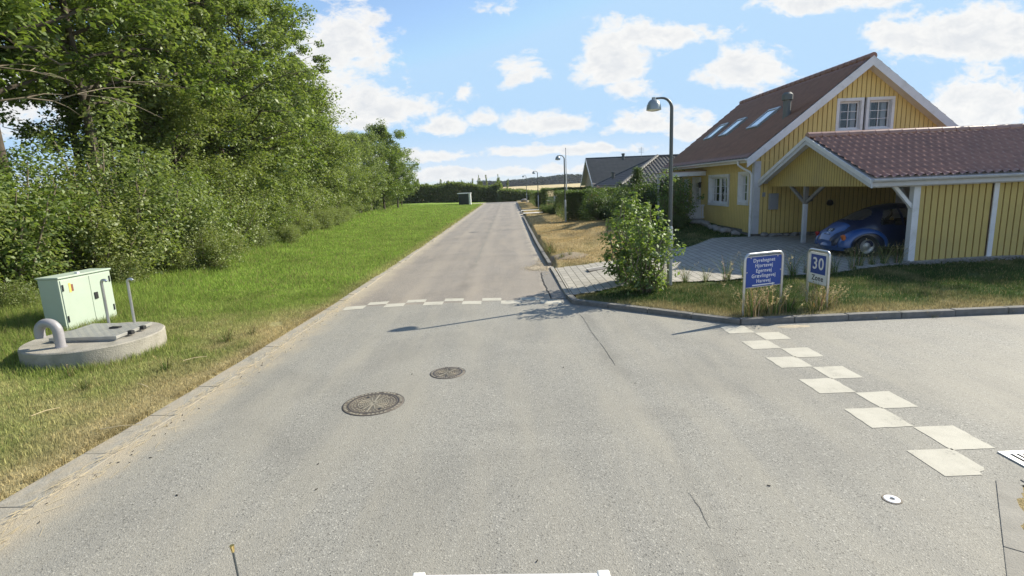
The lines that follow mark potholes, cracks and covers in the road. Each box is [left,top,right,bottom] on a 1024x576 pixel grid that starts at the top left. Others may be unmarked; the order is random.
manhole cover [430,367,466,379]
manhole cover [342,392,405,416]
